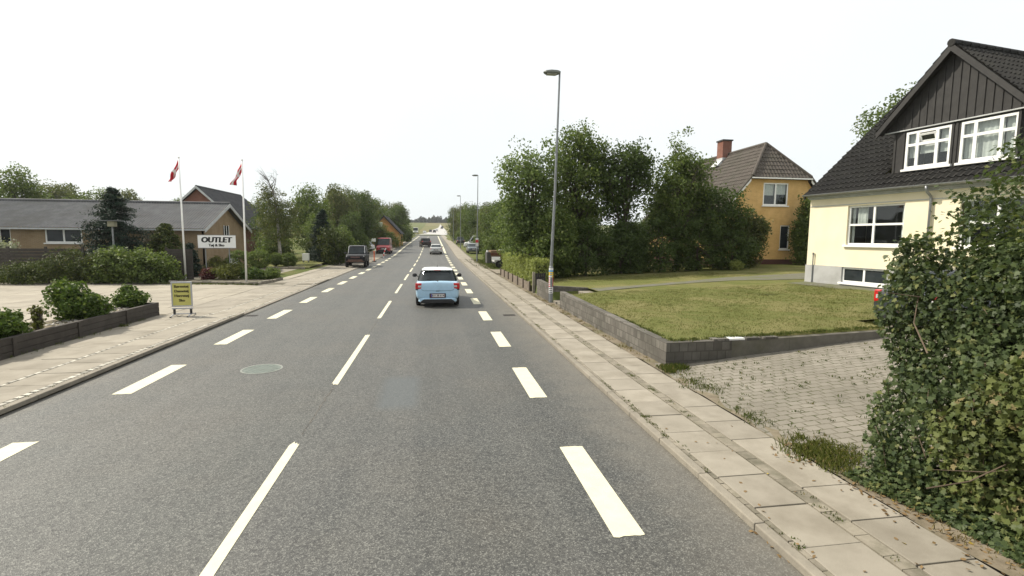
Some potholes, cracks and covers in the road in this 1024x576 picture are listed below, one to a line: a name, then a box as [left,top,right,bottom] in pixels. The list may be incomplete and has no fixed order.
manhole cover [240,364,283,374]
